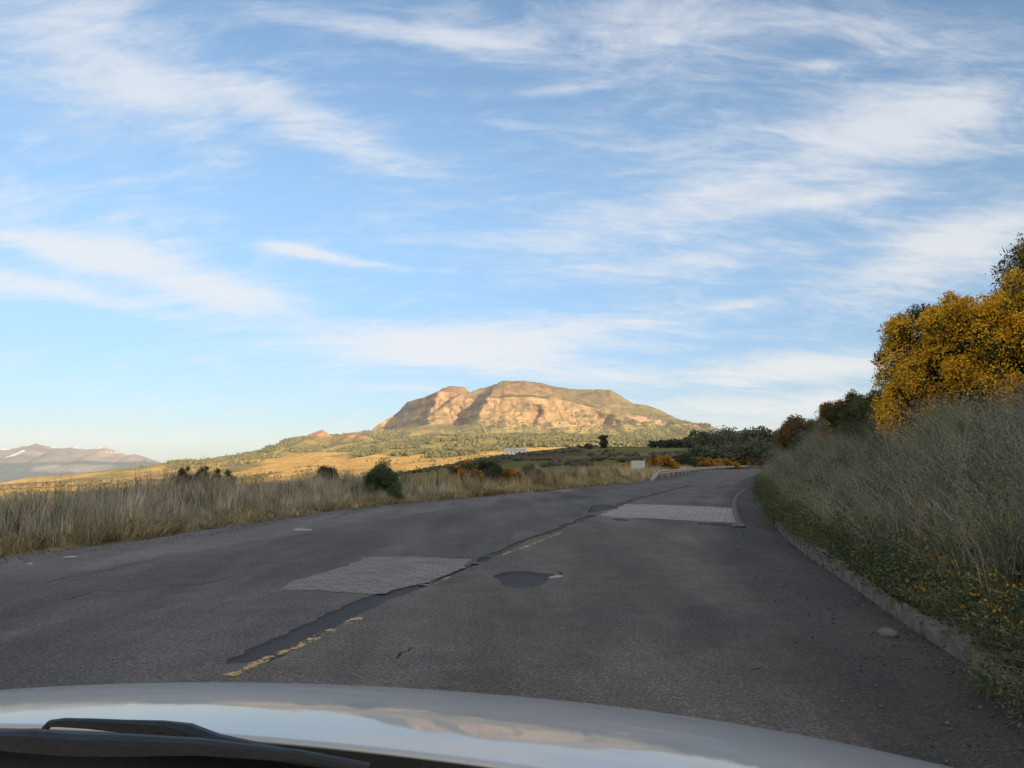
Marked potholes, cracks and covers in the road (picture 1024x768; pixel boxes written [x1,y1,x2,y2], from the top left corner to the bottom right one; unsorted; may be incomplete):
crack [5,486,690,664]
pothole [493,571,555,588]
